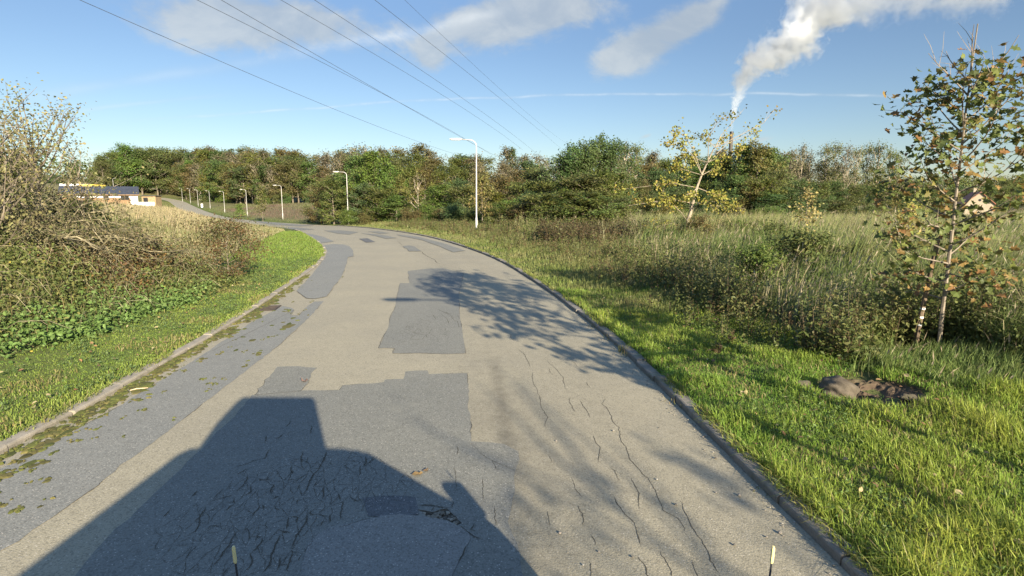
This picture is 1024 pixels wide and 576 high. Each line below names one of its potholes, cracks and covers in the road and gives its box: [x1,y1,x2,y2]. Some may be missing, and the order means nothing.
crack [154,422,497,576]
crack [510,336,720,576]
